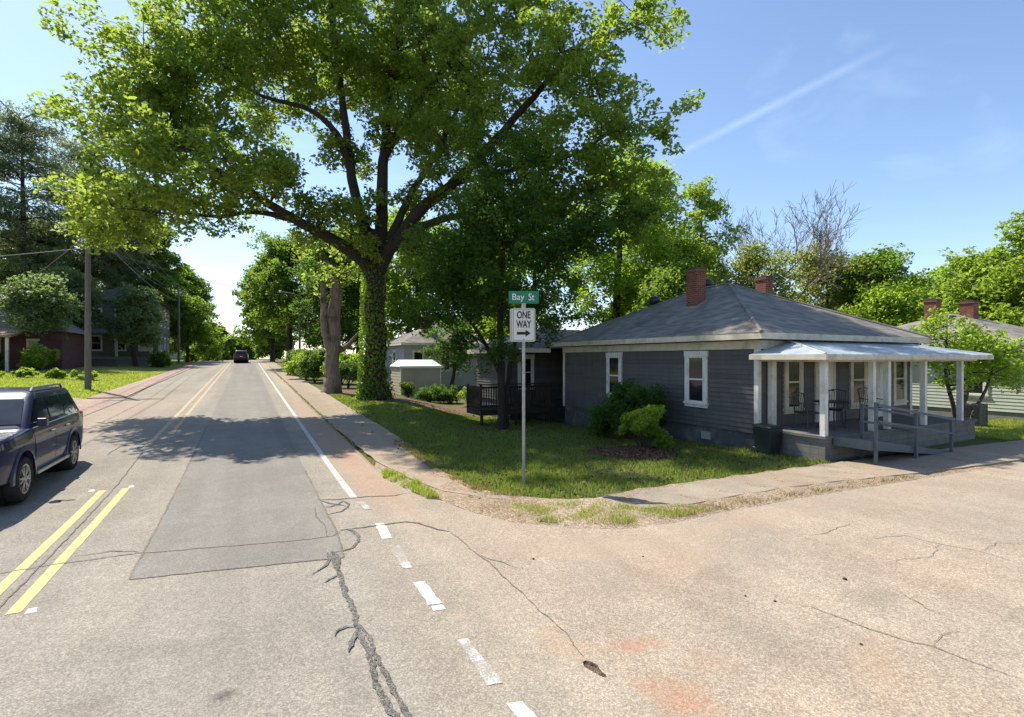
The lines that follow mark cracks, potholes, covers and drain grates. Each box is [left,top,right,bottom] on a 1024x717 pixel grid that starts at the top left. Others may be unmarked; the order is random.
crack [800,605,1022,679]
crack [350,521,447,531]
pothole [583,660,607,678]
crack [2,509,342,573]
crack [880,535,1022,564]
